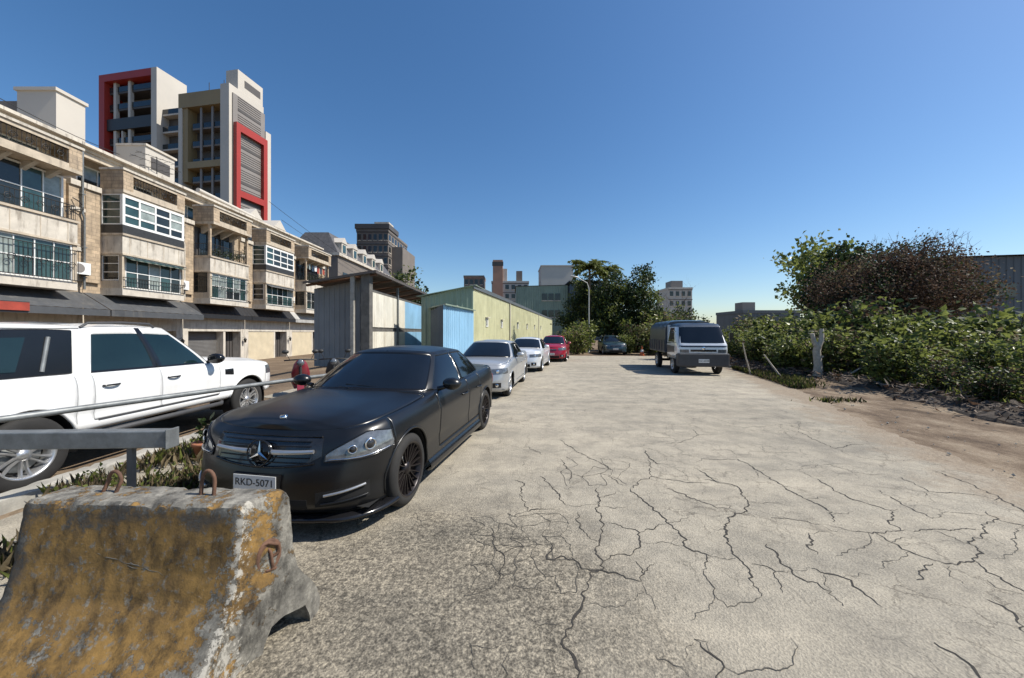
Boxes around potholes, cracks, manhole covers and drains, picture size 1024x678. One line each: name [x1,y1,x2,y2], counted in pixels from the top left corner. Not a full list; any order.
crack [464,421,1024,678]
